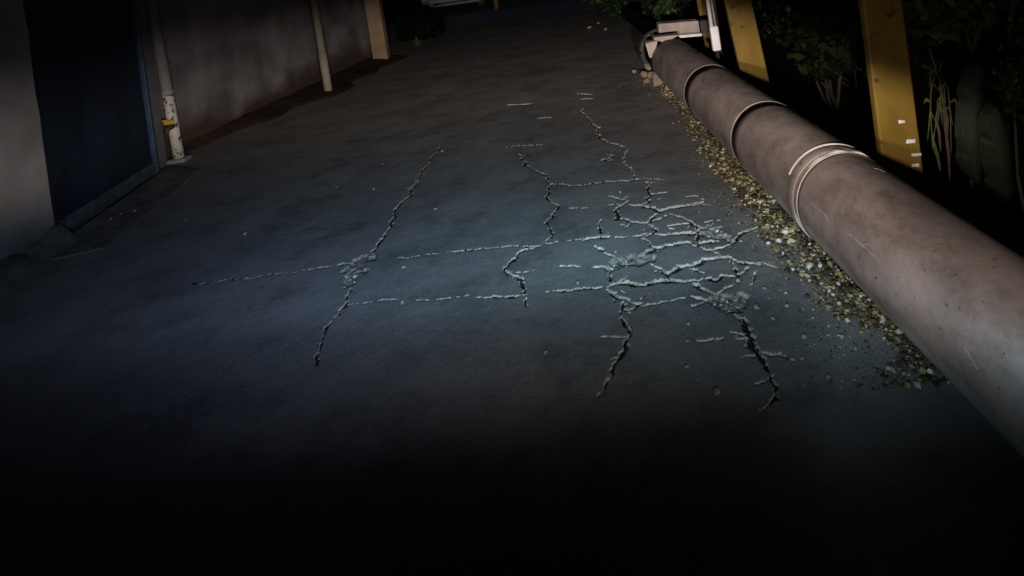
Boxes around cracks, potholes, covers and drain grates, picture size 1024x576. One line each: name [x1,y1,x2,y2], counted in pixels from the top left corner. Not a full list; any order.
crack [191,93,804,413]
